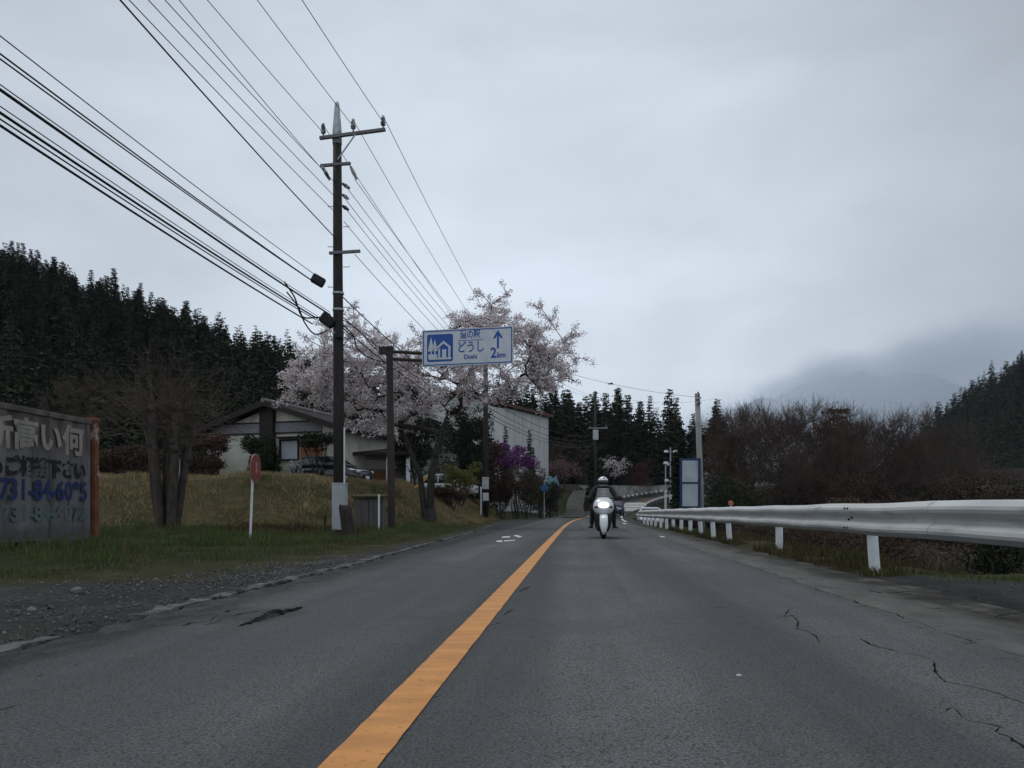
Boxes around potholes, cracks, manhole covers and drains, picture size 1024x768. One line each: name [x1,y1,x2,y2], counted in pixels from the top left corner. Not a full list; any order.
crack [784,609,820,643]
crack [183,608,256,626]
pothole [238,607,302,627]
crack [860,639,1024,703]
